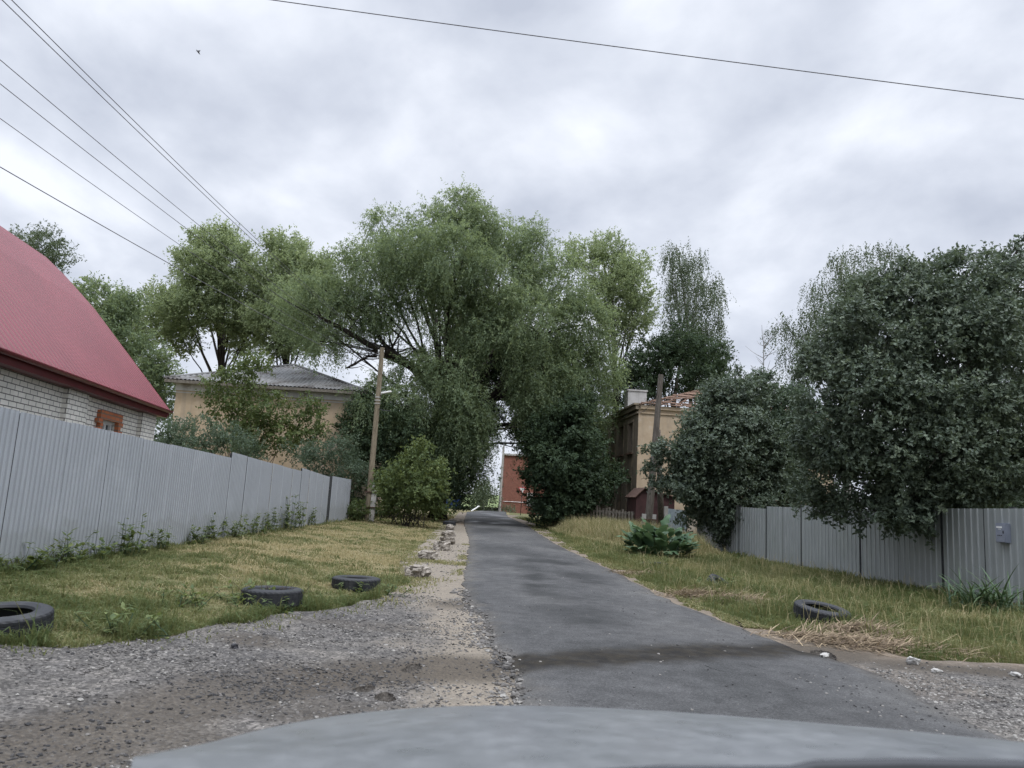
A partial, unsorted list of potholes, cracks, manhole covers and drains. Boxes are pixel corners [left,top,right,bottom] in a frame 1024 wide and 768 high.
pothole [374,692,396,702]
